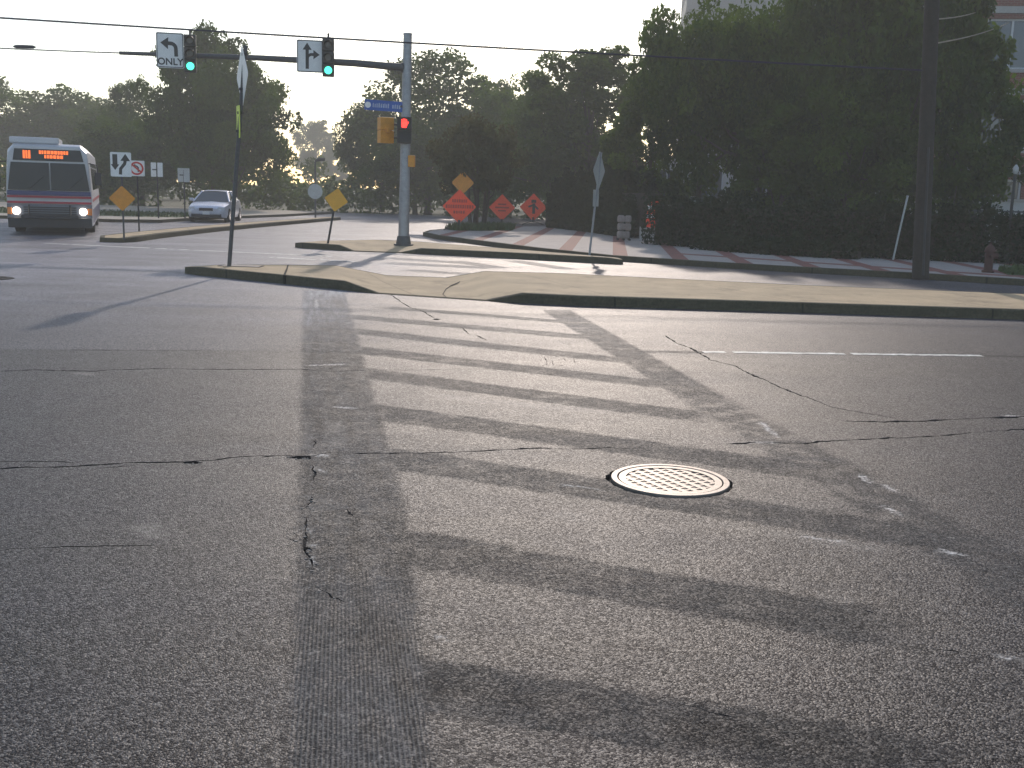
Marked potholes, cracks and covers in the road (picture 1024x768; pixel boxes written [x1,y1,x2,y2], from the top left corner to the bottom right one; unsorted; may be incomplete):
crack [0,439,635,480]
crack [288,497,350,605]
crack [391,281,460,319]
manhole cover [605,464,733,499]
crack [665,335,1024,445]
